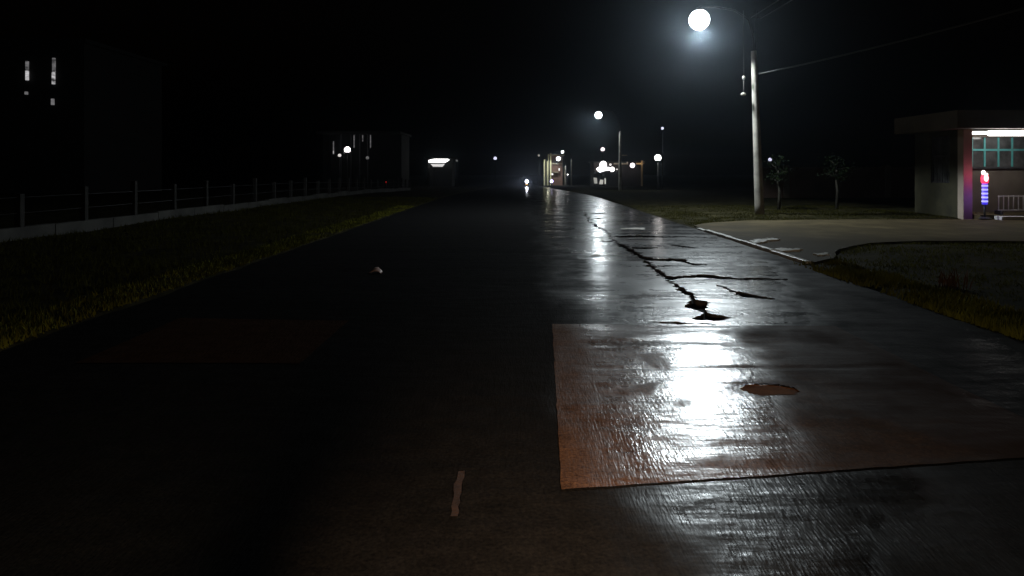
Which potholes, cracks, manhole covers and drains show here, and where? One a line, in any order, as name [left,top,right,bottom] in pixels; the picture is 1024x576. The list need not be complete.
pothole [685,300,732,321]
crack [583,210,788,304]
